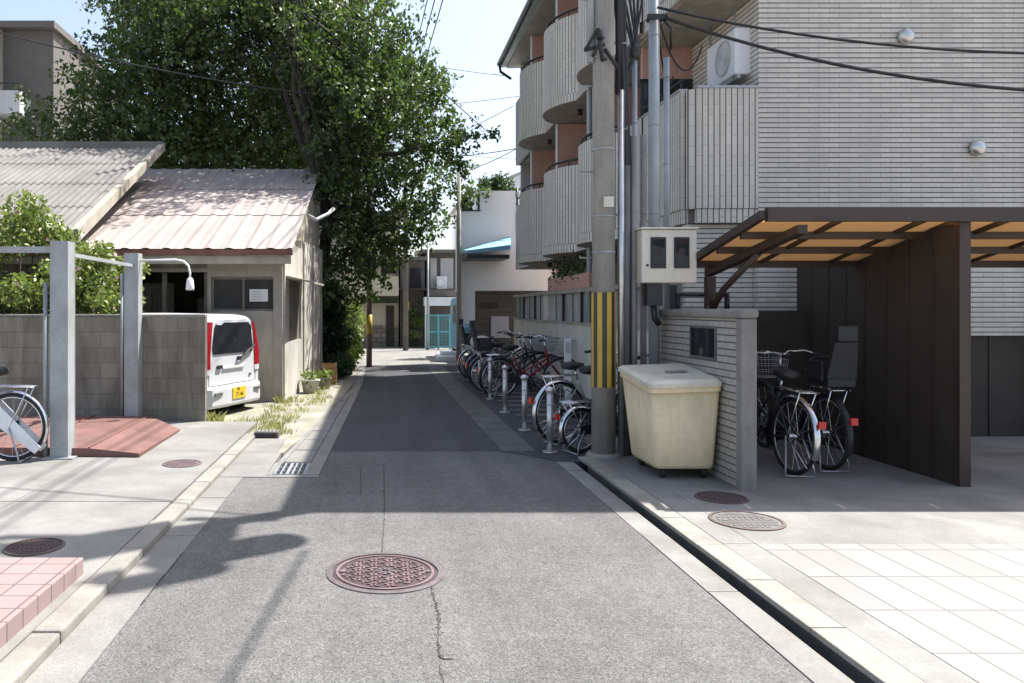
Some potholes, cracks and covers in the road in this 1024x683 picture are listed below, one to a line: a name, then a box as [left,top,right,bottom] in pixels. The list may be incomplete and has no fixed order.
manhole cover [694,491,749,504]
manhole cover [2,537,65,557]
manhole cover [708,510,787,531]
manhole cover [162,459,202,468]
manhole cover [326,552,444,594]
drain grate [271,463,311,475]
crack [430,586,453,683]
